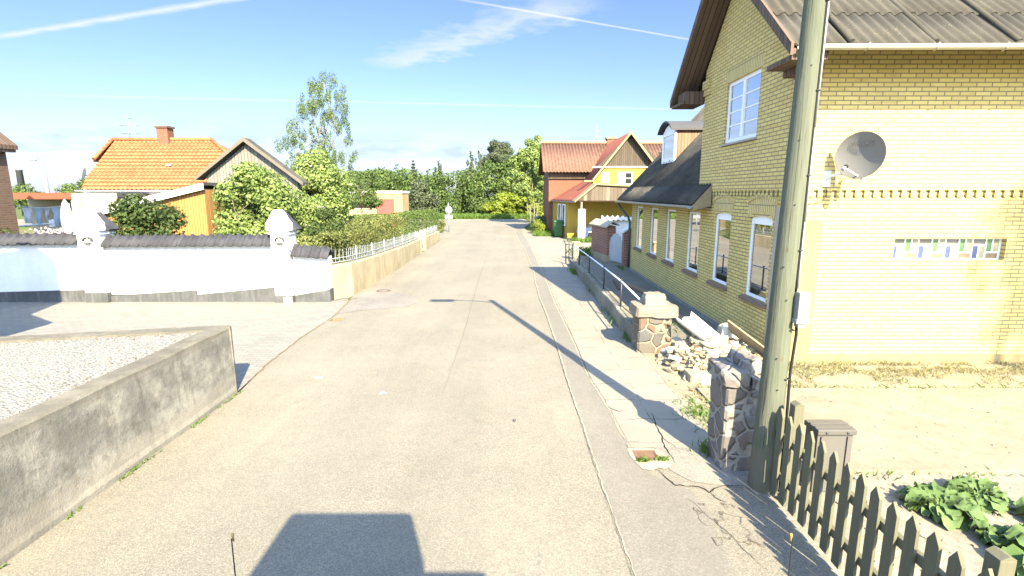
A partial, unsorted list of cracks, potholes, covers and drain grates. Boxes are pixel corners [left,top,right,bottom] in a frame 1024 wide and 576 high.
crack [652,414,772,565]
